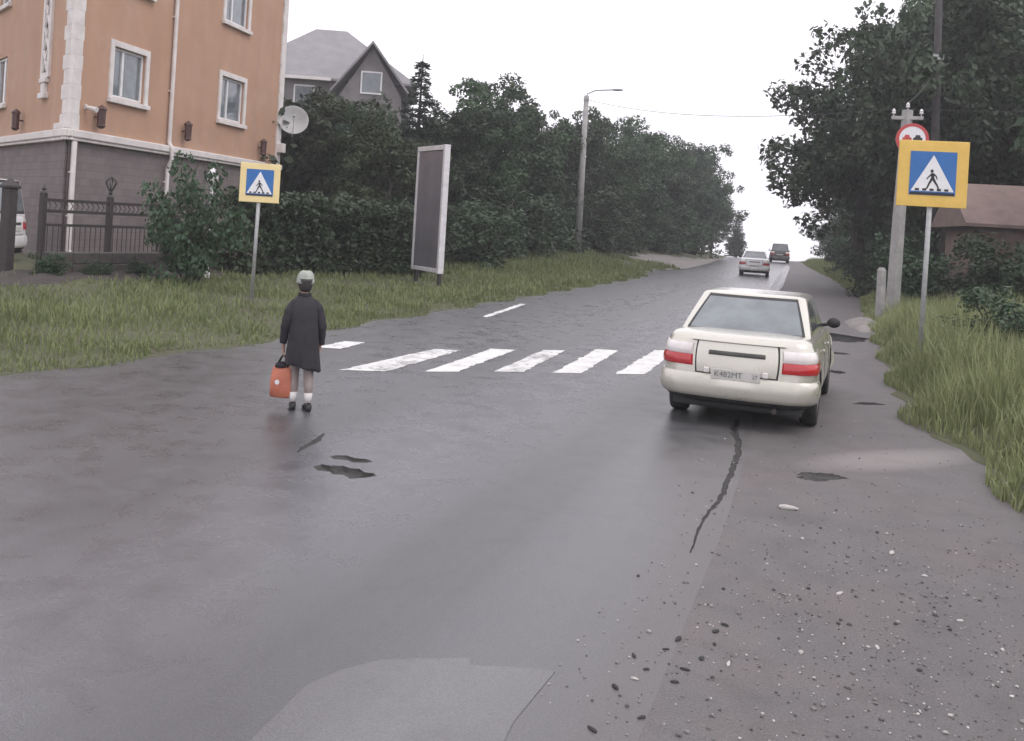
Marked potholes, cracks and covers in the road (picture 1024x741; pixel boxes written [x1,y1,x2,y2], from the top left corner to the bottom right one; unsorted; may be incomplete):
pothole [330,455,372,463]
pothole [313,464,376,479]
pothole [796,472,849,482]
pothole [830,333,868,342]
crack [689,419,742,553]
